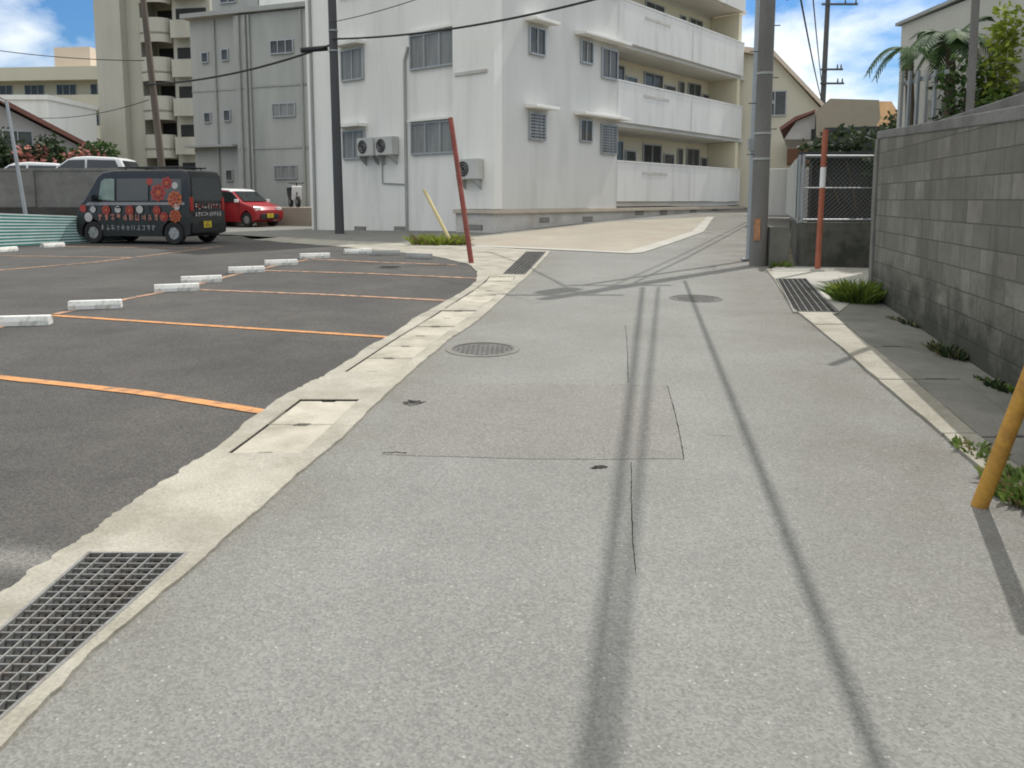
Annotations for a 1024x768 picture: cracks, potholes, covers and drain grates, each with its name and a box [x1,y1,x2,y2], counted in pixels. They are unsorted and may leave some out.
drain grate [503,251,546,274]
drain grate [777,278,838,312]
drain grate [0,551,189,720]
manhole cover [446,341,520,357]
manhole cover [669,294,723,302]
